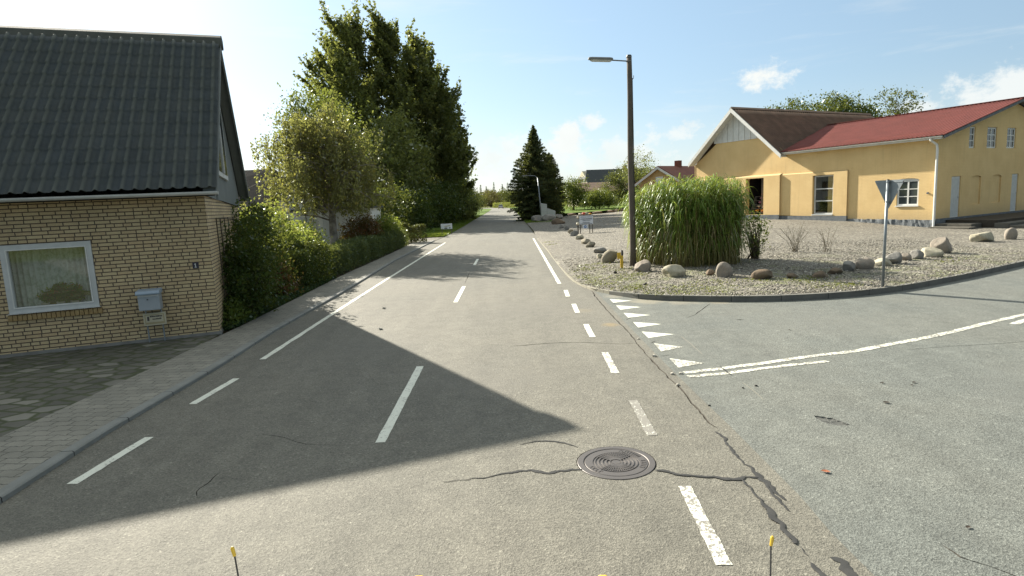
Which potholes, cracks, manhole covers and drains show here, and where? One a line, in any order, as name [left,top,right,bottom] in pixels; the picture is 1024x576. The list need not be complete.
manhole cover [576,446,657,480]
crack [943,545,1015,576]
